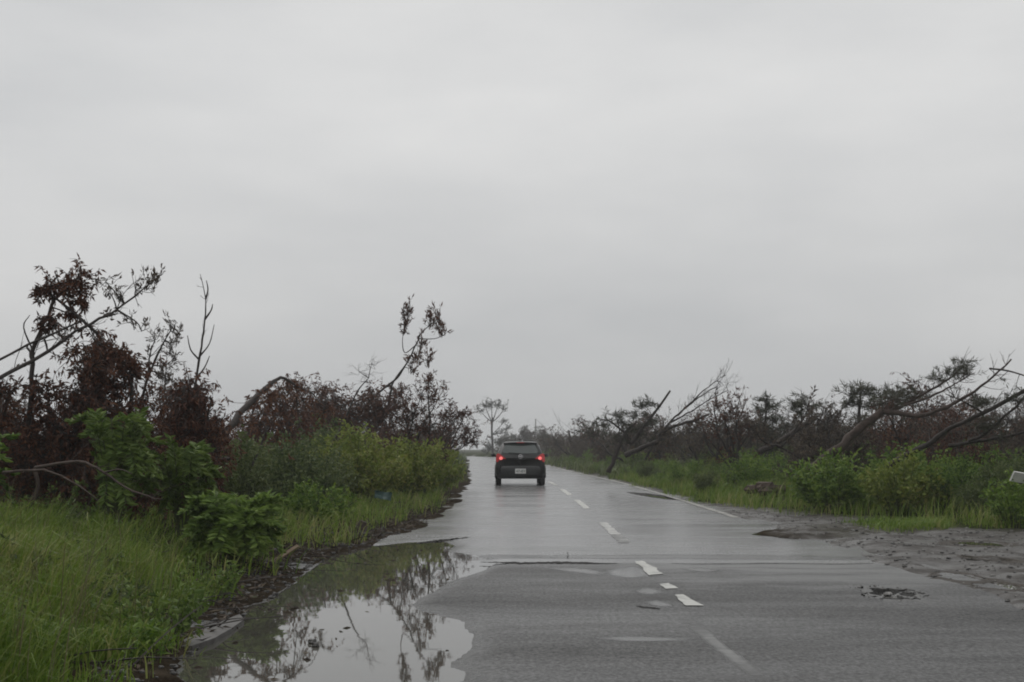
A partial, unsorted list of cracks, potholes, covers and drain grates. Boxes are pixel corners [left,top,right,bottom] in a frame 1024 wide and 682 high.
pothole [850,585,931,604]
pothole [629,492,687,500]
